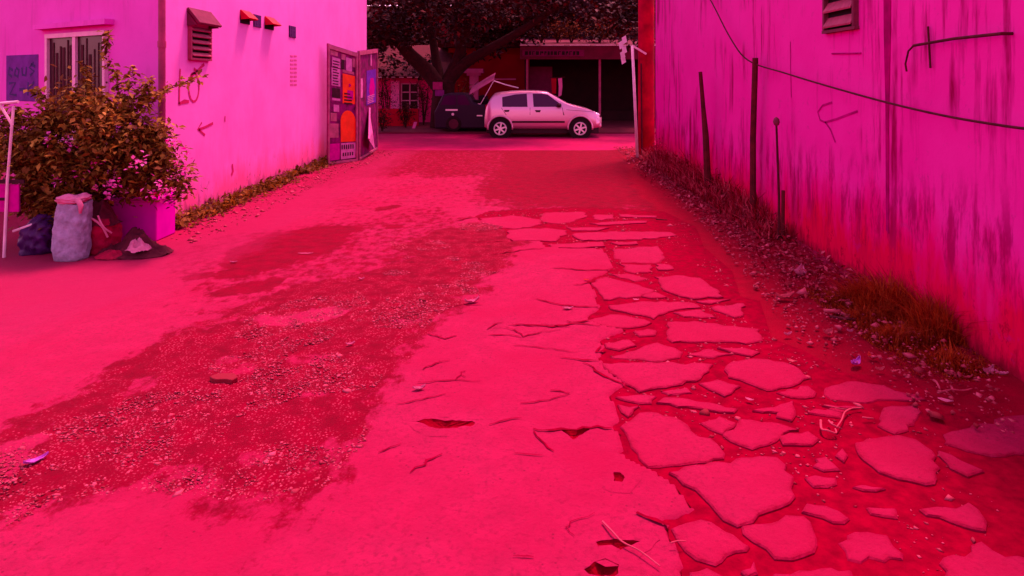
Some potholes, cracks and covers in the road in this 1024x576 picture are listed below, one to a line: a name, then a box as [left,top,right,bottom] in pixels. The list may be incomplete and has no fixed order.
pothole [546,421,604,446]
pothole [576,527,660,567]
crack [397,208,1024,576]
pothole [404,415,490,437]
pothole [572,545,640,576]
